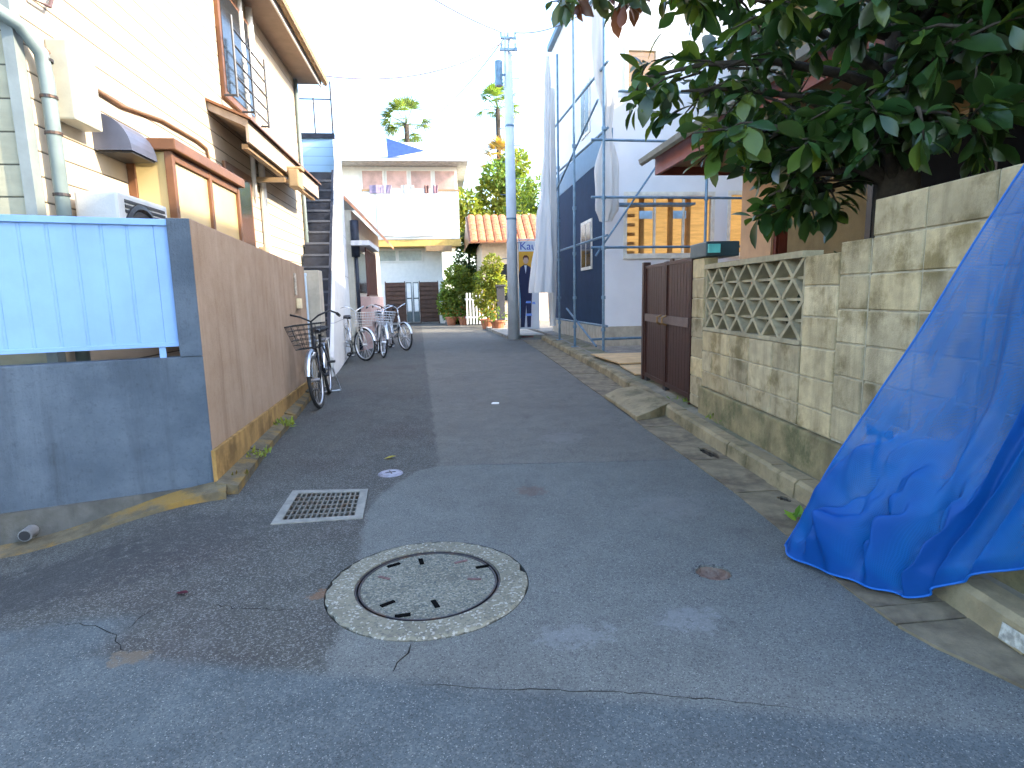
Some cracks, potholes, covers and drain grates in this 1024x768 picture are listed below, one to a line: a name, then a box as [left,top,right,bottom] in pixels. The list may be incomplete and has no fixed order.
drain grate [270,489,368,525]
crack [439,684,782,707]
manhole cover [325,542,528,642]
crack [48,608,158,653]
